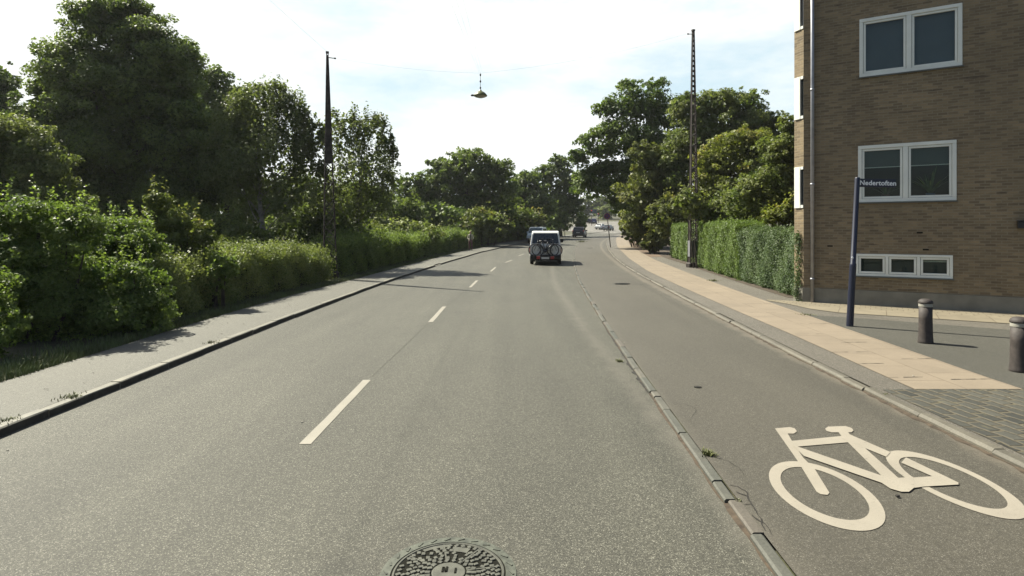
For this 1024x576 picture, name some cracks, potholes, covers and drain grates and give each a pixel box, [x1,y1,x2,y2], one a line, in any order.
manhole cover [379,537,517,576]
crack [721,459,772,534]
